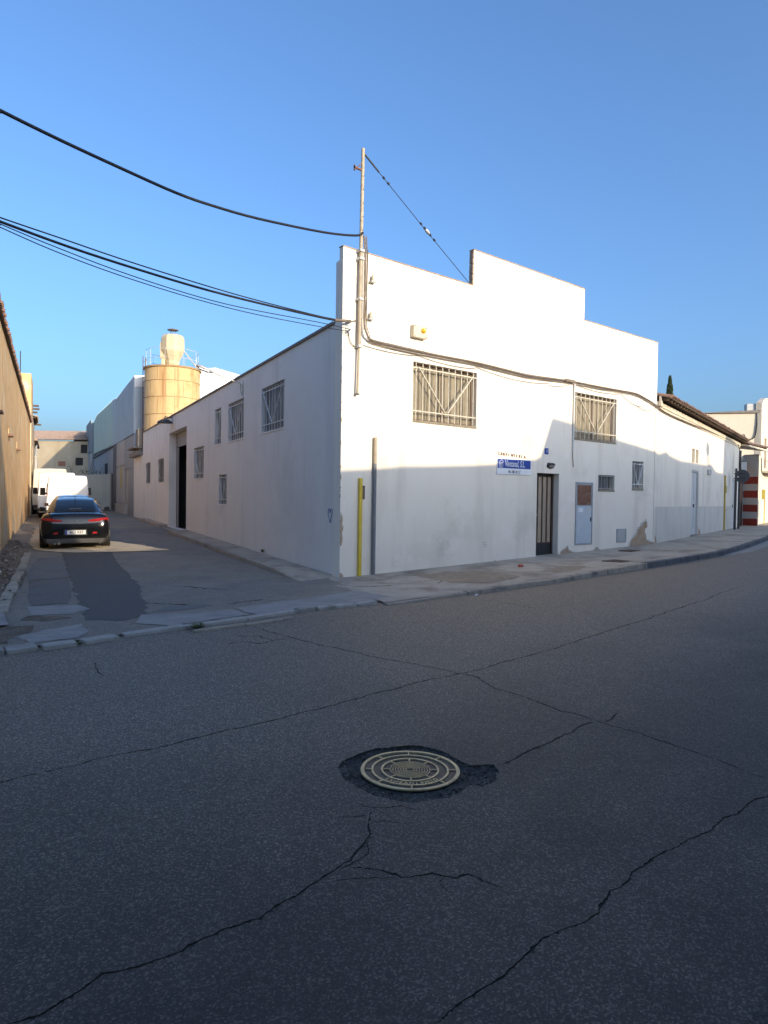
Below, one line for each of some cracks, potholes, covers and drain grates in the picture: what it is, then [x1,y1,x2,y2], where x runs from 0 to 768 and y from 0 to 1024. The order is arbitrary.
crack [435,795,768,1024]
crack [0,587,768,783]
crack [9,803,502,1024]
manhole cover [360,751,460,793]
